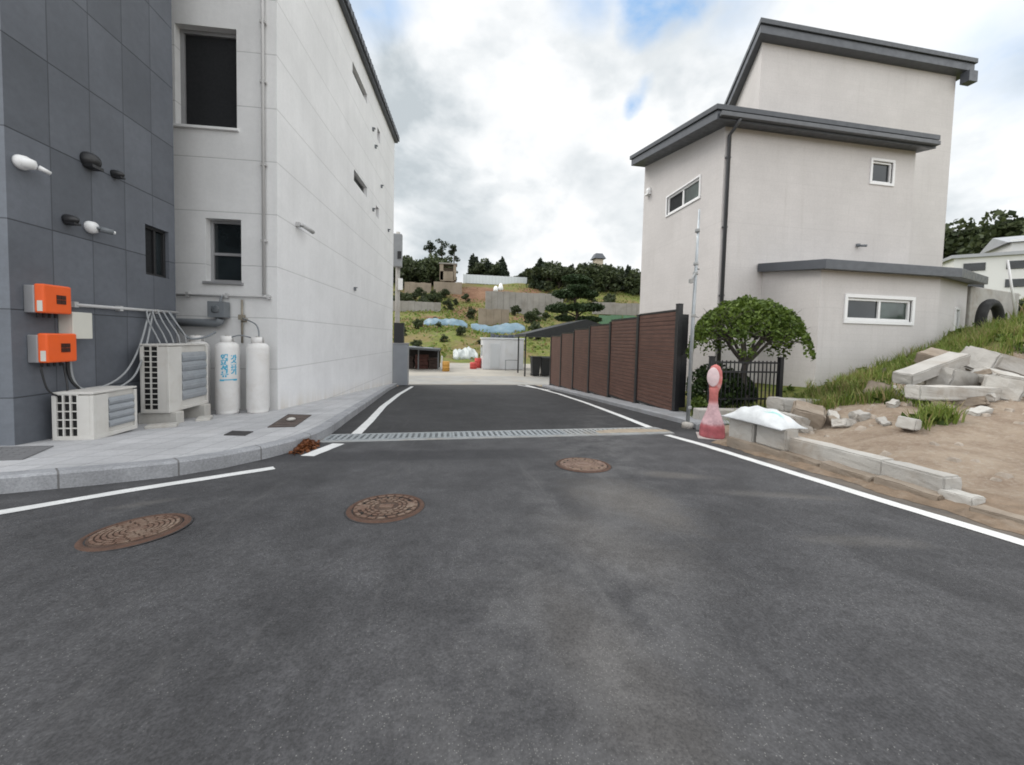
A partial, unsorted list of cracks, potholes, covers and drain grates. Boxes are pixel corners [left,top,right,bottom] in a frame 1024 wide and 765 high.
manhole cover [267,414,311,428]
manhole cover [555,457,612,473]
manhole cover [344,494,426,524]
manhole cover [74,513,194,553]
